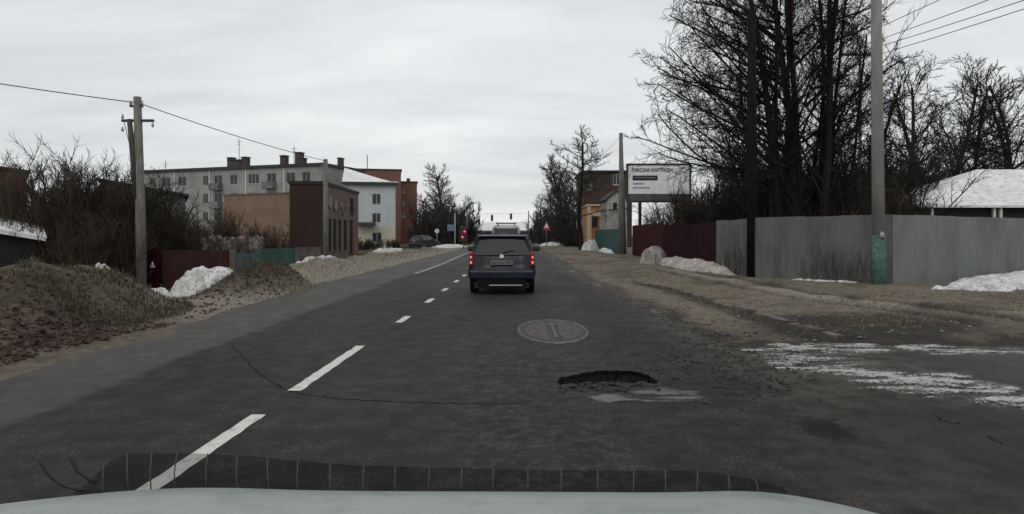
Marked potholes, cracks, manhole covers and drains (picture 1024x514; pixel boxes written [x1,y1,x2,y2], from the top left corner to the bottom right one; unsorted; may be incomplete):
crack [232,345,540,405]
pothole [557,370,659,387]
manhole cover [517,319,589,344]
